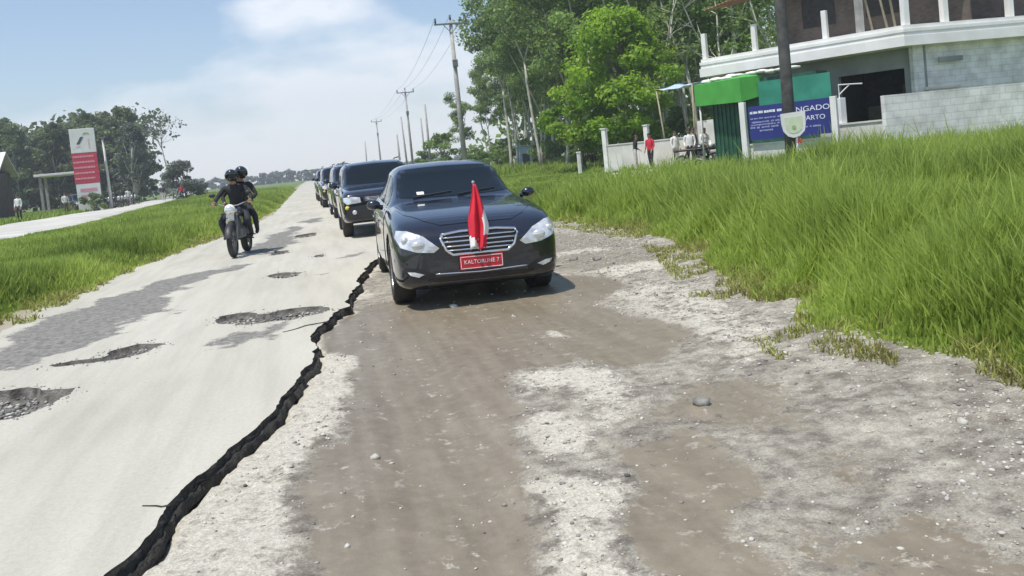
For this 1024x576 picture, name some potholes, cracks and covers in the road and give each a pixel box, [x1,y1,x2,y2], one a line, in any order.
crack [105,259,379,576]
pothole [206,304,335,328]
pothole [34,339,178,371]
pothole [268,271,302,279]
pothole [0,382,105,425]
